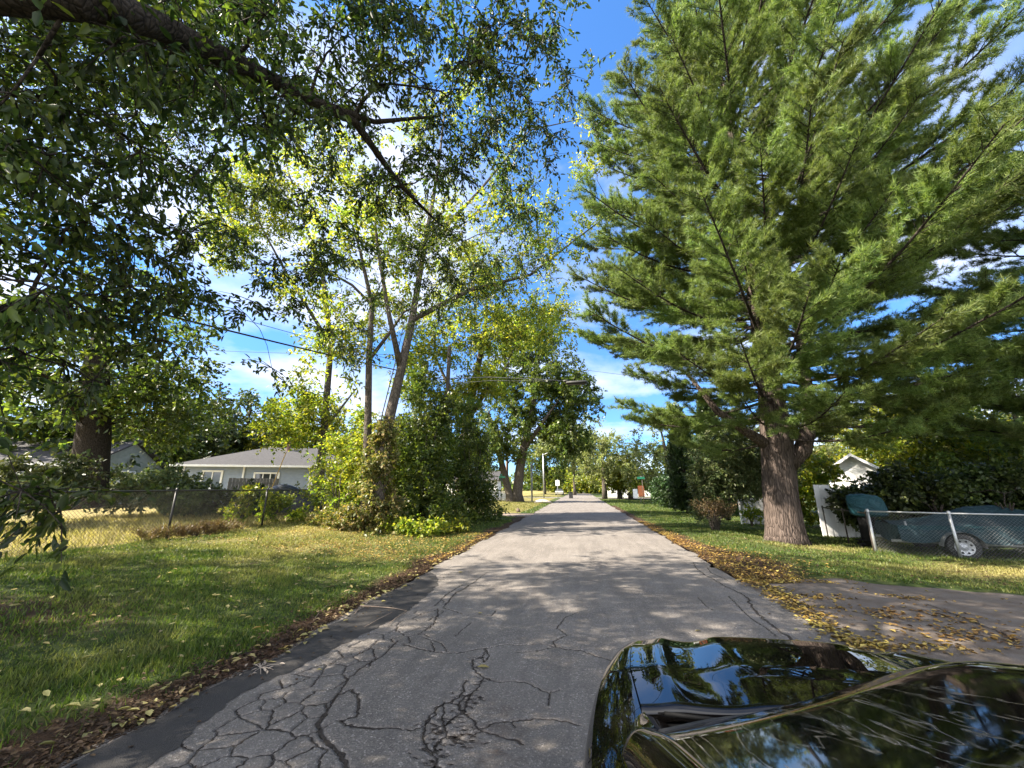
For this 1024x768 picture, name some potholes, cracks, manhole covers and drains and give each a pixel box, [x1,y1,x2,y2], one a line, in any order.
crack [171,573,611,768]
crack [693,563,792,640]
